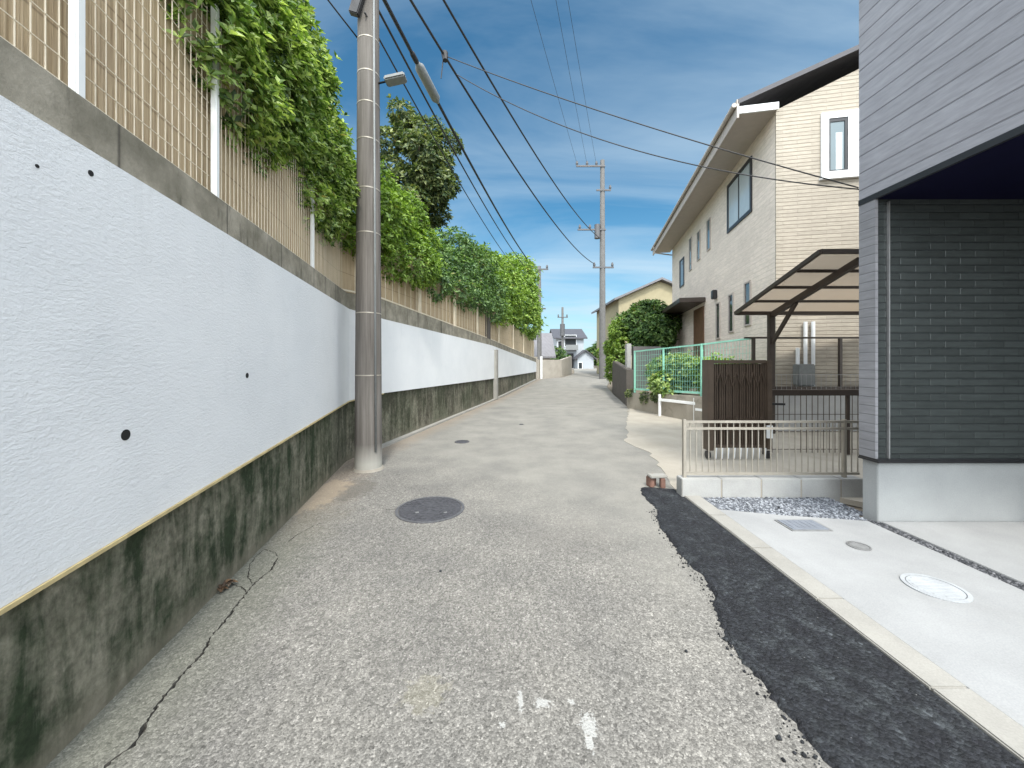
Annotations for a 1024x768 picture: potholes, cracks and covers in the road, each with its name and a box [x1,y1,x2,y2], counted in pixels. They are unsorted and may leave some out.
crack [104,523,320,768]
manhole cover [395,496,464,524]
utility cover [900,573,973,603]
utility cover [846,541,872,551]
